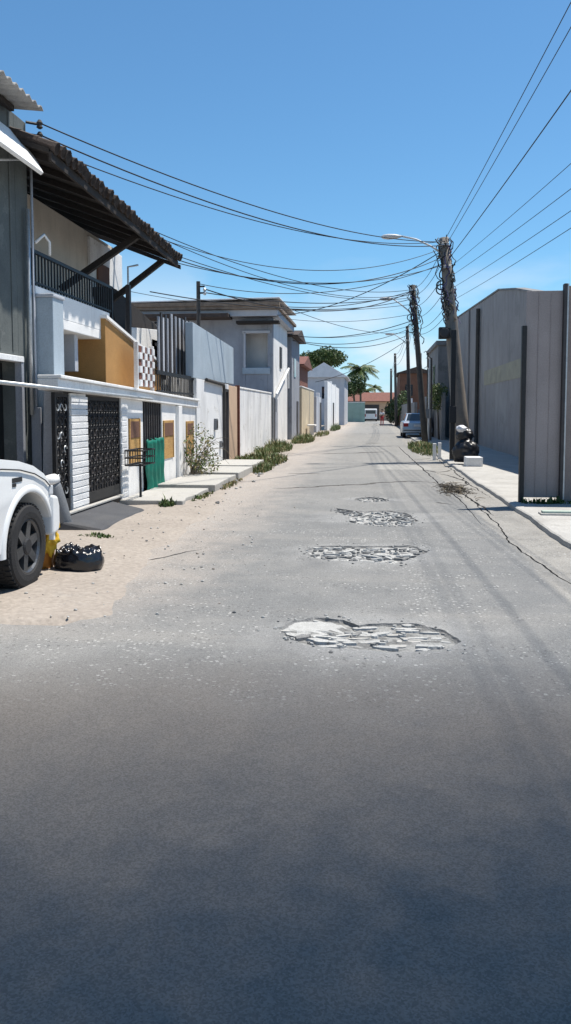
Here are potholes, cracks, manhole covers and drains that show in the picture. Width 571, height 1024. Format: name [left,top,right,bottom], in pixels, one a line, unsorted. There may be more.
pothole [293,543,430,566]
pothole [257,614,466,659]
crack [280,446,571,584]
pothole [330,507,425,527]
